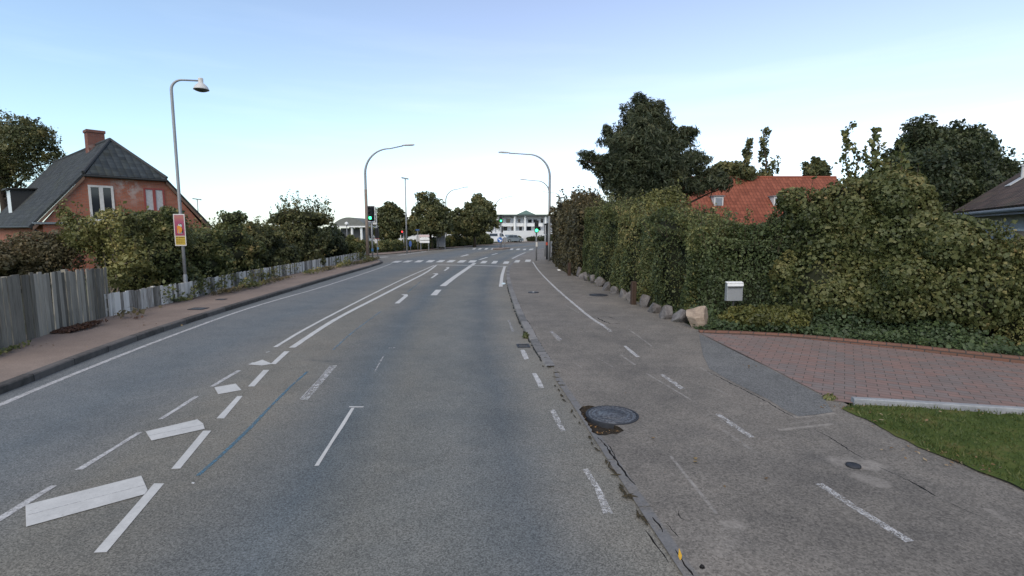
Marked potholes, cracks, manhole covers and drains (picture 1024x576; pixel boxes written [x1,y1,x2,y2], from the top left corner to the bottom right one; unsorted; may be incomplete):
crack [598,438,635,484]
manhole cover [586,405,639,429]
crack [652,512,694,576]
